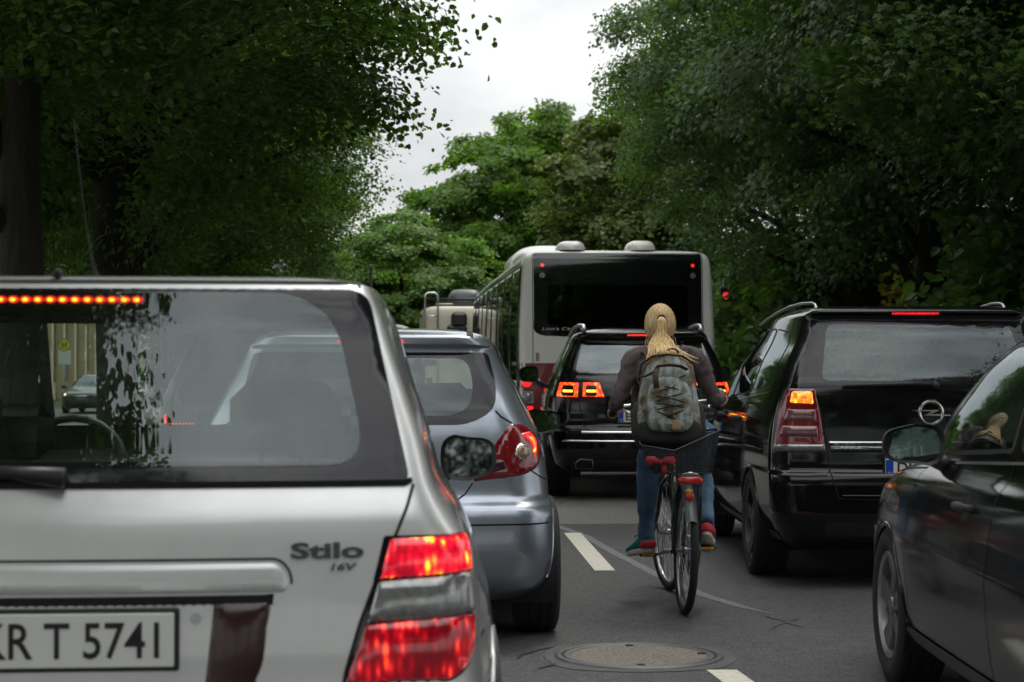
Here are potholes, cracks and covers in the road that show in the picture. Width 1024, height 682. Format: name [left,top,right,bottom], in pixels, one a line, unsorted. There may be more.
manhole cover [544,642,737,672]
crack [763,615,802,631]
